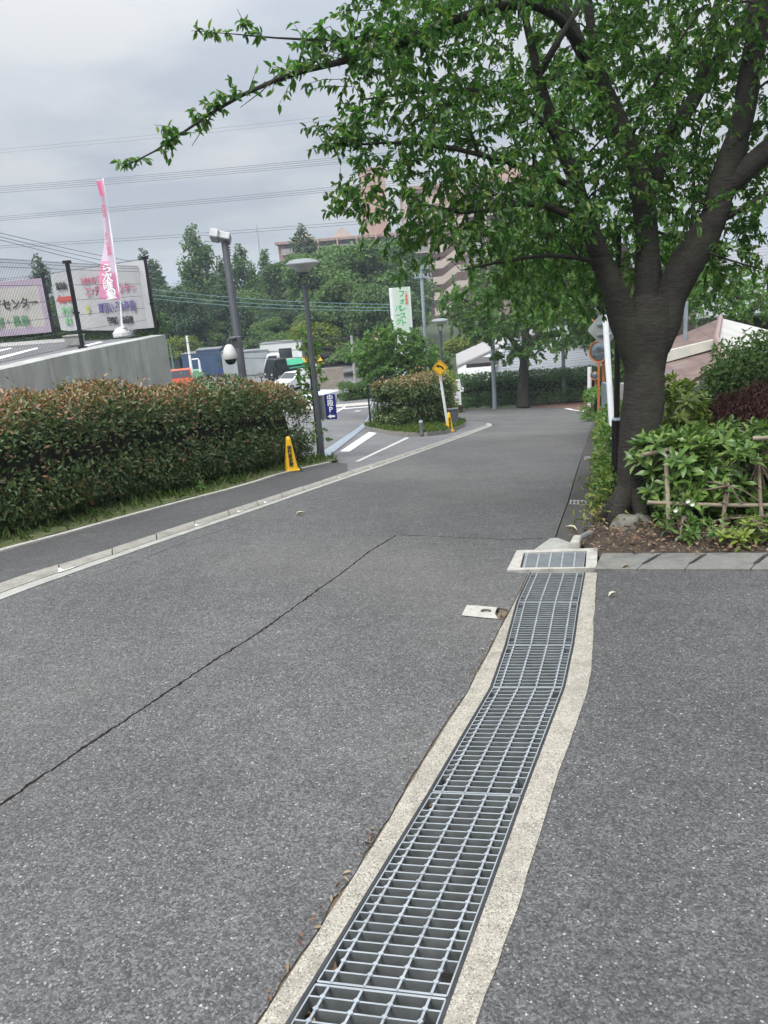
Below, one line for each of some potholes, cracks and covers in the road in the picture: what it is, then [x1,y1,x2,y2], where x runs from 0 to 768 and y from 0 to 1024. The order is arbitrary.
manhole cover [462,605,498,619]
drain grate [493,645,572,688]
drain grate [507,602,578,646]
drain grate [518,573,584,602]
drain grate [317,792,521,999]
drain grate [291,983,446,1024]
crack [0,535,546,806]
drain grate [432,687,562,796]
